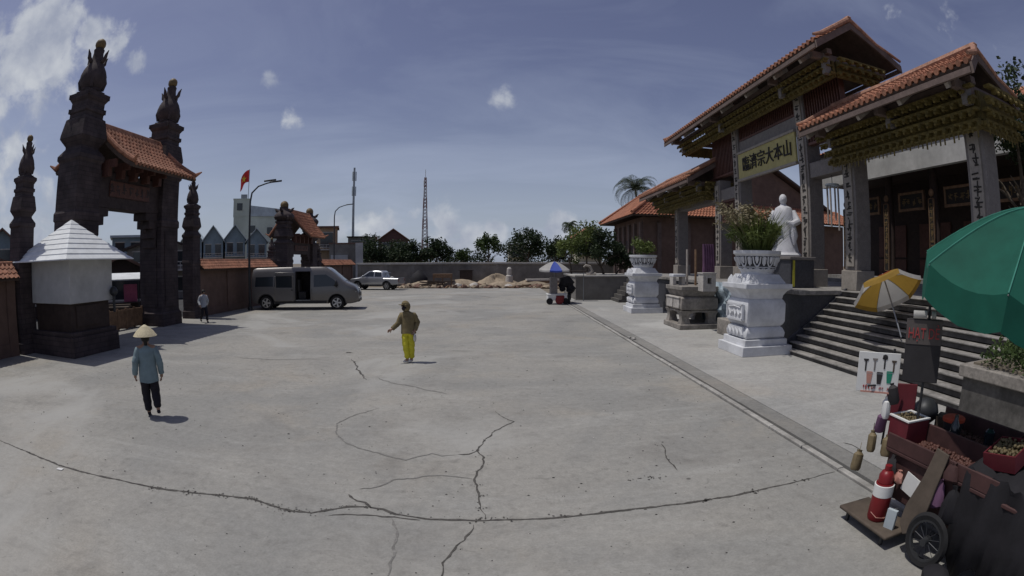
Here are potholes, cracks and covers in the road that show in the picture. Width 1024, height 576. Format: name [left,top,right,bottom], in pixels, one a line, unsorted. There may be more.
crack [0,408,832,576]
crack [346,352,446,394]
